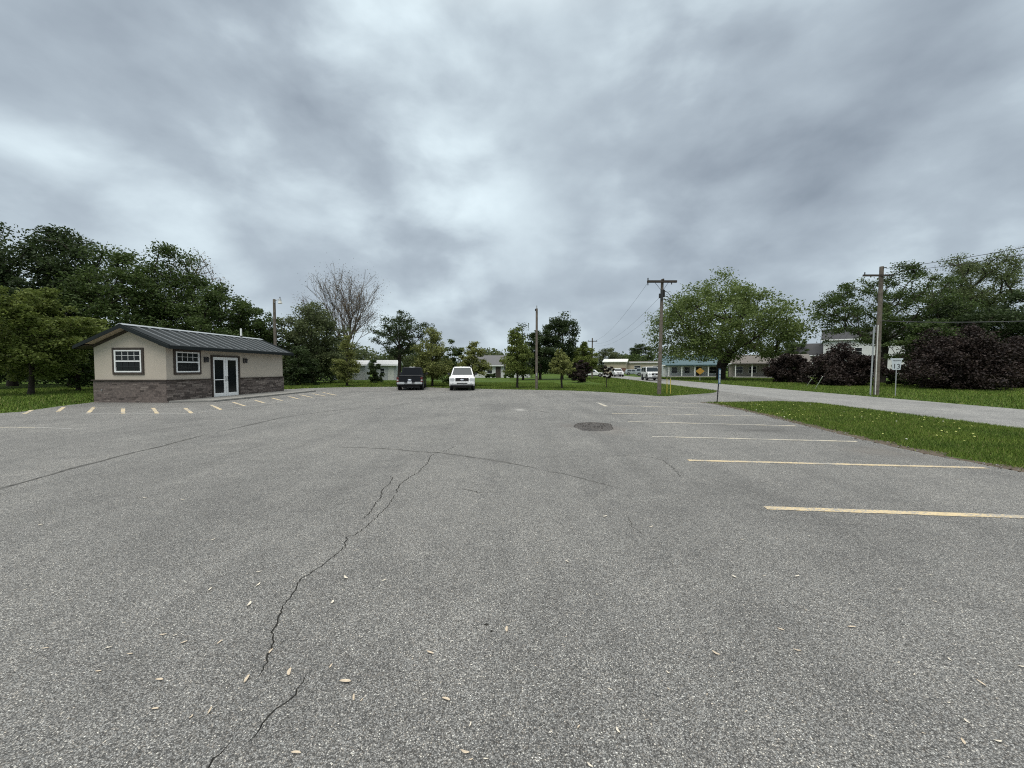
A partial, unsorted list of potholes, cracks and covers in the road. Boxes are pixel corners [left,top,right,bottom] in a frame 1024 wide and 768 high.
crack [208,447,621,768]
